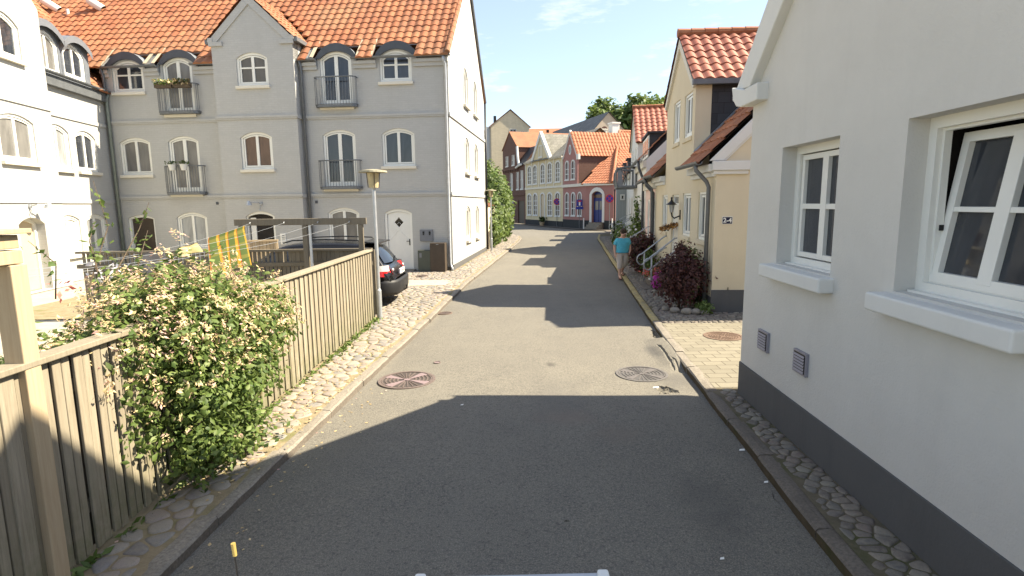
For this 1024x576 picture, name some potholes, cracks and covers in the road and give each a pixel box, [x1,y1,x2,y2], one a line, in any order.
manhole cover [378,371,435,390]
manhole cover [703,331,742,341]
crack [657,344,680,372]
manhole cover [616,366,668,382]
